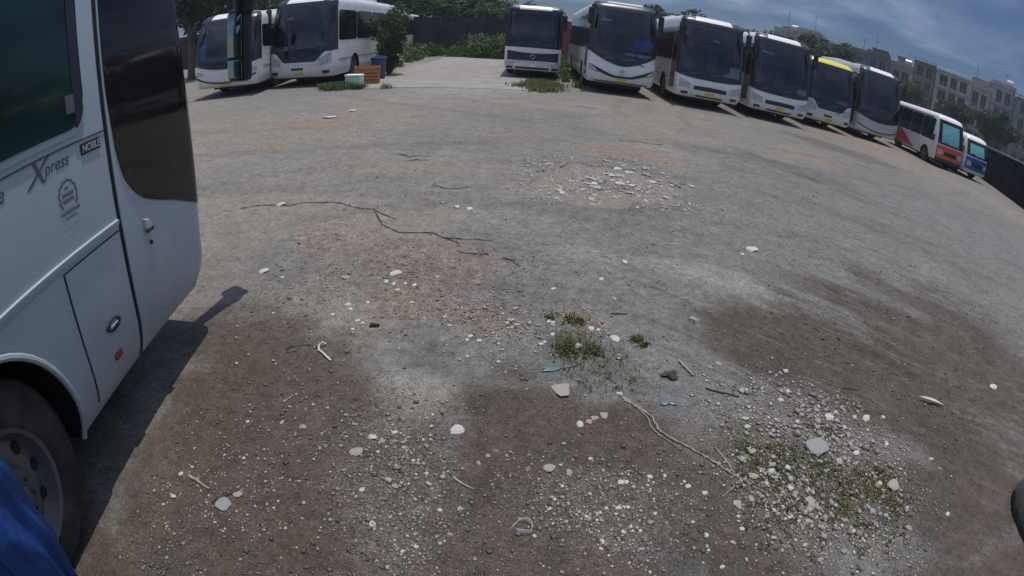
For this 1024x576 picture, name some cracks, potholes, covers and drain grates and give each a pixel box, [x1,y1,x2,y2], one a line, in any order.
crack [397,154,431,162]
crack [240,184,519,267]
